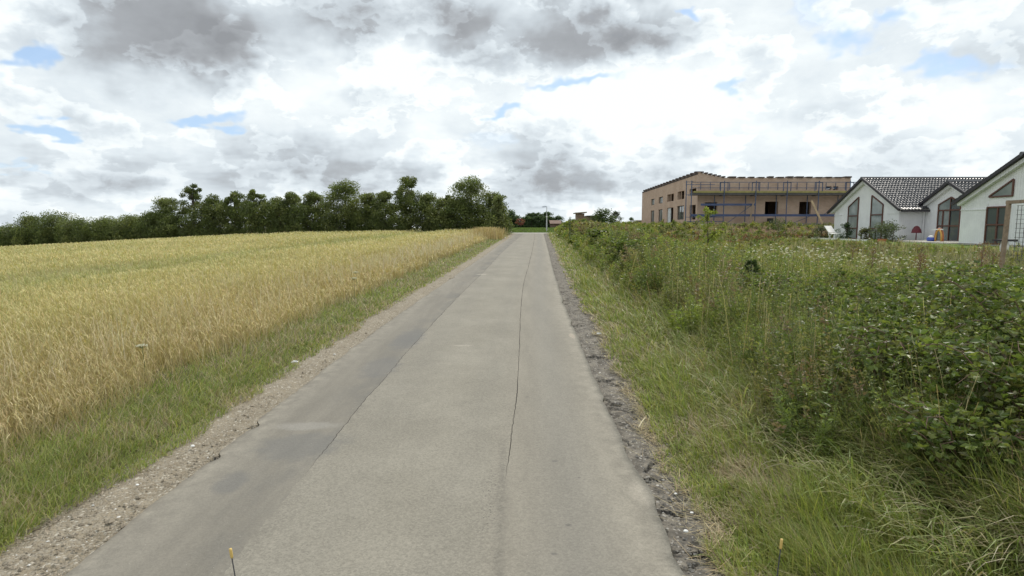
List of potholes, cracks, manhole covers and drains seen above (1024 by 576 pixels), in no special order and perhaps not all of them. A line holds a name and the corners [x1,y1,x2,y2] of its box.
crack [504,236,535,484]
crack [316,233,524,460]
